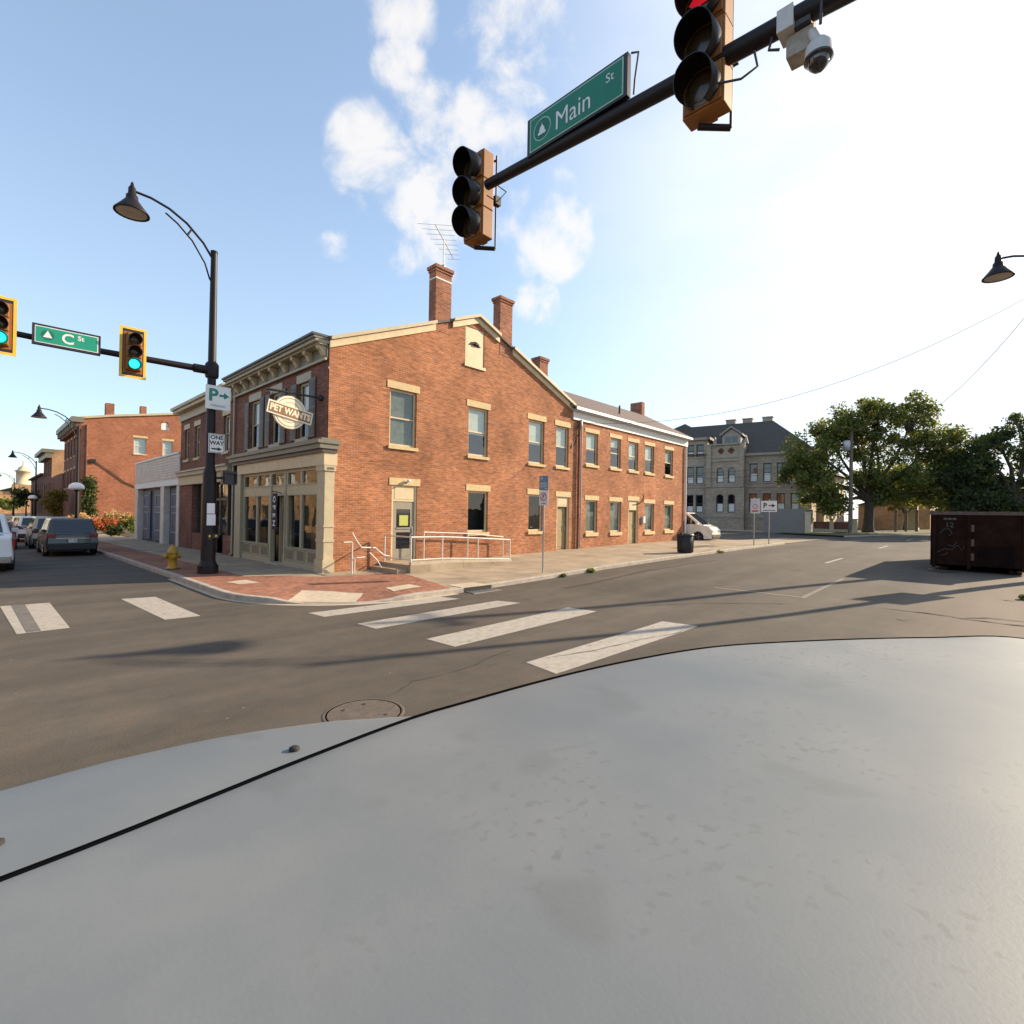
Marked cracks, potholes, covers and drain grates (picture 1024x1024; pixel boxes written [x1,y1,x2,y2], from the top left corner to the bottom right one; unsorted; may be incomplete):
crack [881,607,1024,626]
manhole cover [321,699,405,722]
drain grate [447,582,498,594]
